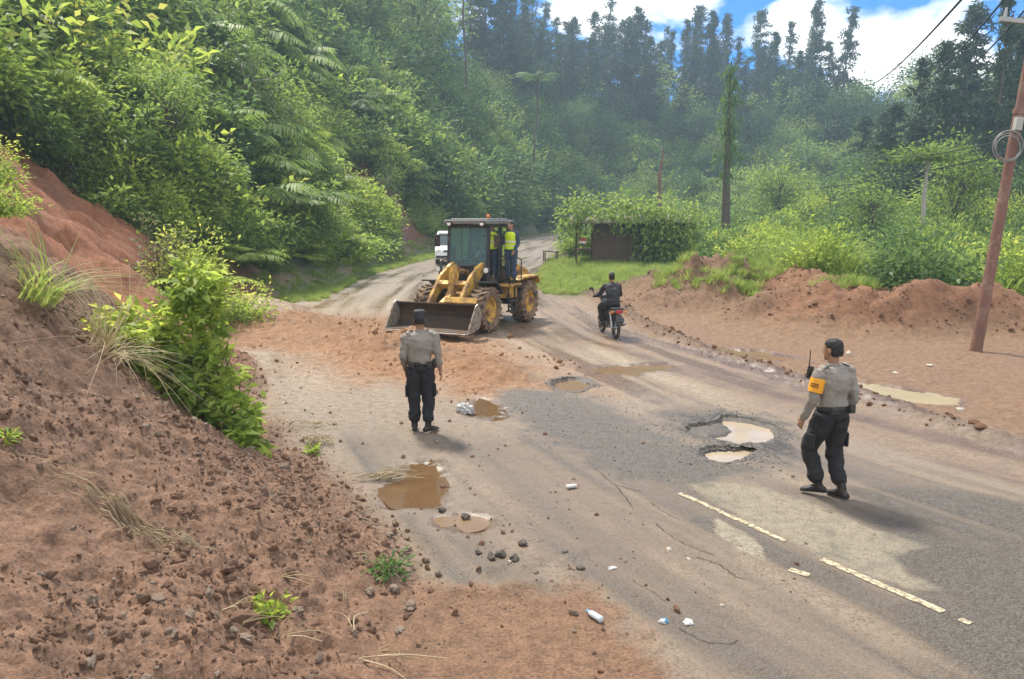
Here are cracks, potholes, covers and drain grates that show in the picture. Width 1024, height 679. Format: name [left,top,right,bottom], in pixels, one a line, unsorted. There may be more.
pothole [677,412,787,448]
pothole [693,442,765,464]
crack [632,580,666,603]
crack [679,629,738,646]
crack [594,468,748,581]
pothole [544,375,602,394]
